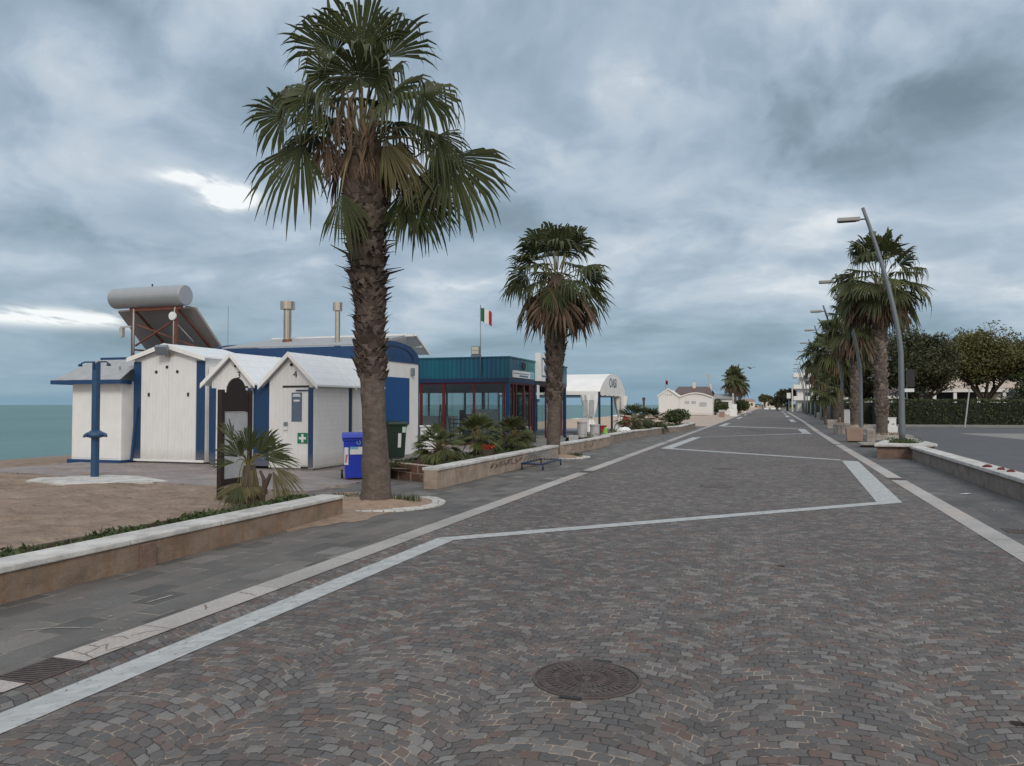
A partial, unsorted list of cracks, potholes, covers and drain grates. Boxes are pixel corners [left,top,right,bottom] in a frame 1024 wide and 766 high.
manhole cover [532,659,642,701]
drain grate [0,657,89,690]
